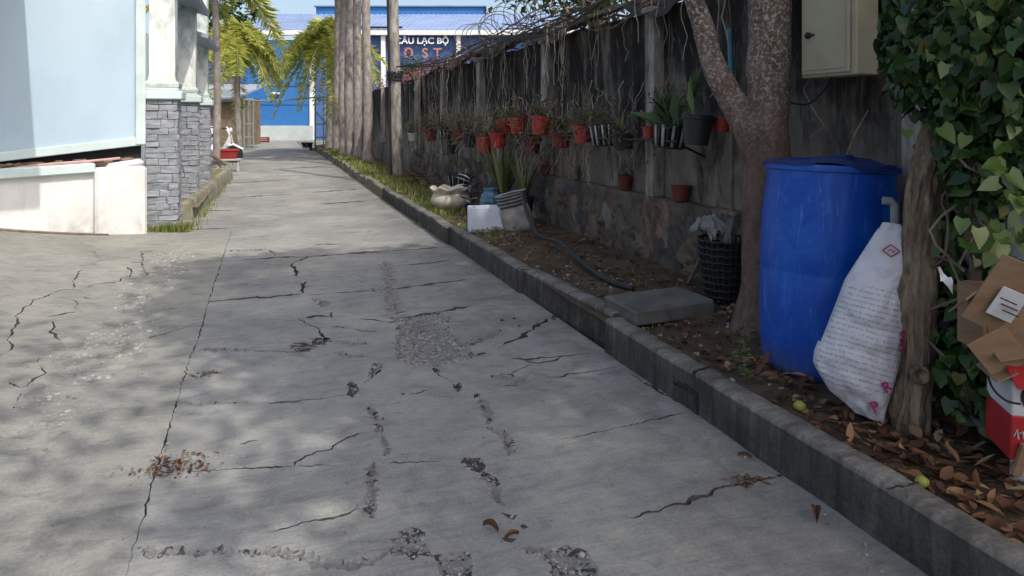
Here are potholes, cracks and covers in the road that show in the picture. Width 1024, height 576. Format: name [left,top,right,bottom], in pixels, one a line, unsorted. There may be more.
crack [140,407,435,572]
pothole [434,551,474,576]
pothole [537,545,600,576]
crack [2,249,156,408]
pothole [389,527,434,561]
crack [224,244,683,506]
